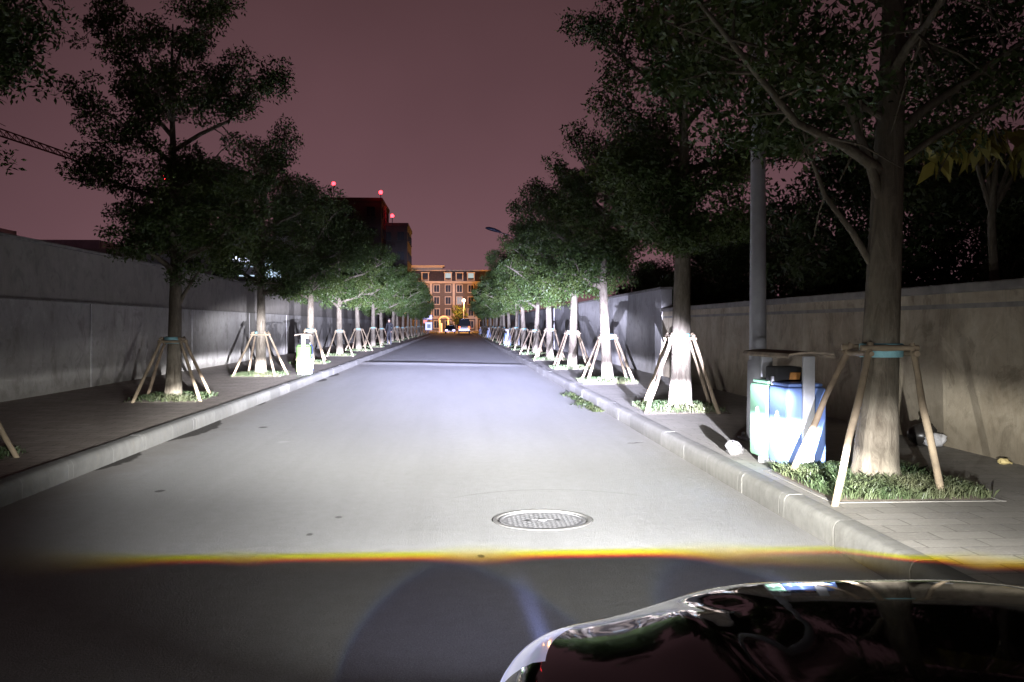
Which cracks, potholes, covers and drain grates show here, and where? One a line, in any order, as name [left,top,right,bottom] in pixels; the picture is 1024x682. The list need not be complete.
manhole cover [492,509,593,531]
